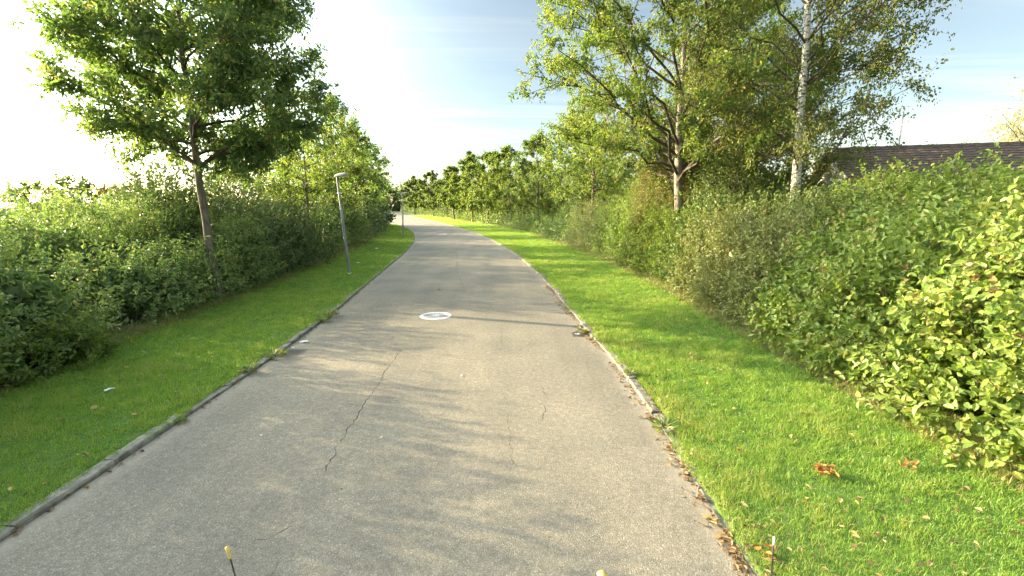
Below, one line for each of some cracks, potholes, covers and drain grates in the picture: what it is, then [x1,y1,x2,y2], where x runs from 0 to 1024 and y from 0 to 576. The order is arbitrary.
manhole cover [420,312,452,320]
crack [324,351,401,475]
